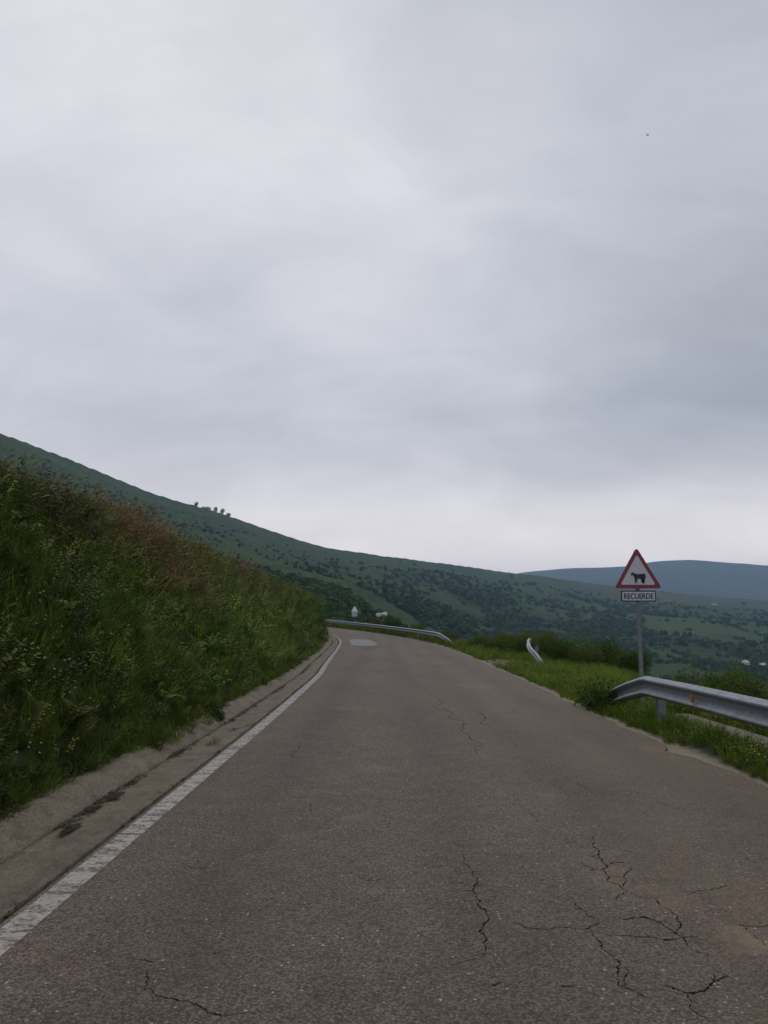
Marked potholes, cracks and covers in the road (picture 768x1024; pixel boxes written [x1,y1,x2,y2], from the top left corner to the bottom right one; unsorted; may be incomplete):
crack [430,690,486,758]
crack [453,842,494,961]
crack [514,896,728,1022]
crack [139,959,258,1016]
crack [581,836,635,900]
